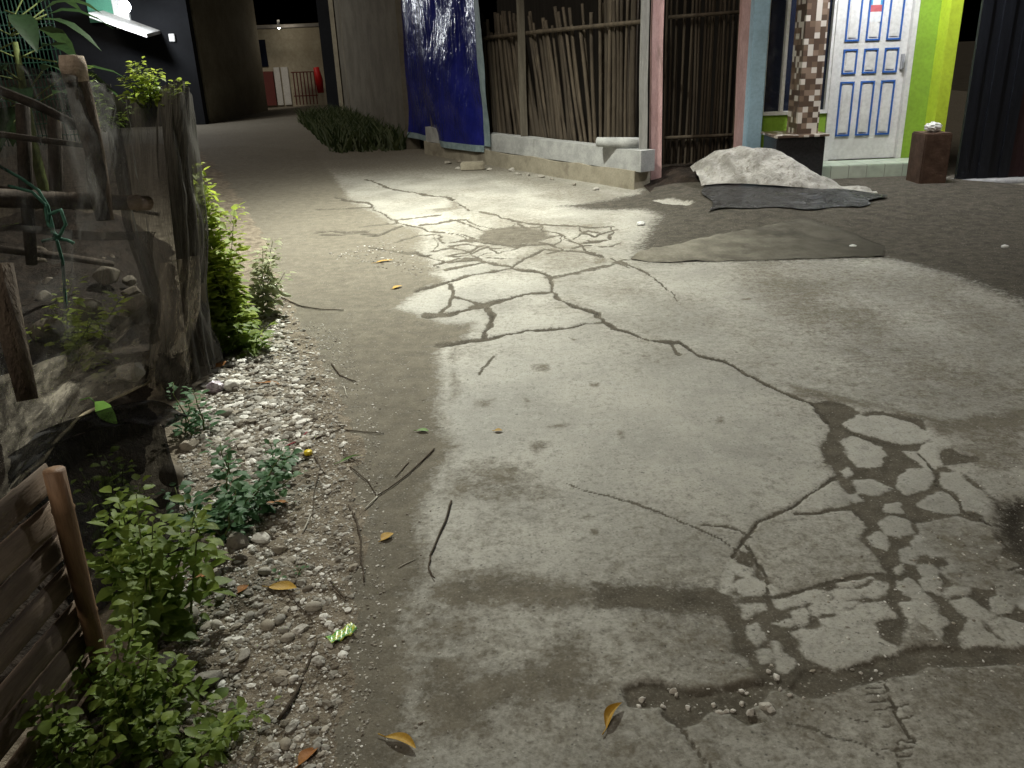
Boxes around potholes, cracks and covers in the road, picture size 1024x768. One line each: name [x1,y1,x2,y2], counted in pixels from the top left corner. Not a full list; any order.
crack [313,178,890,445]
crack [787,677,920,768]
pothole [623,679,772,728]
crack [567,476,884,600]
crack [917,452,1024,570]
crack [662,710,715,768]
